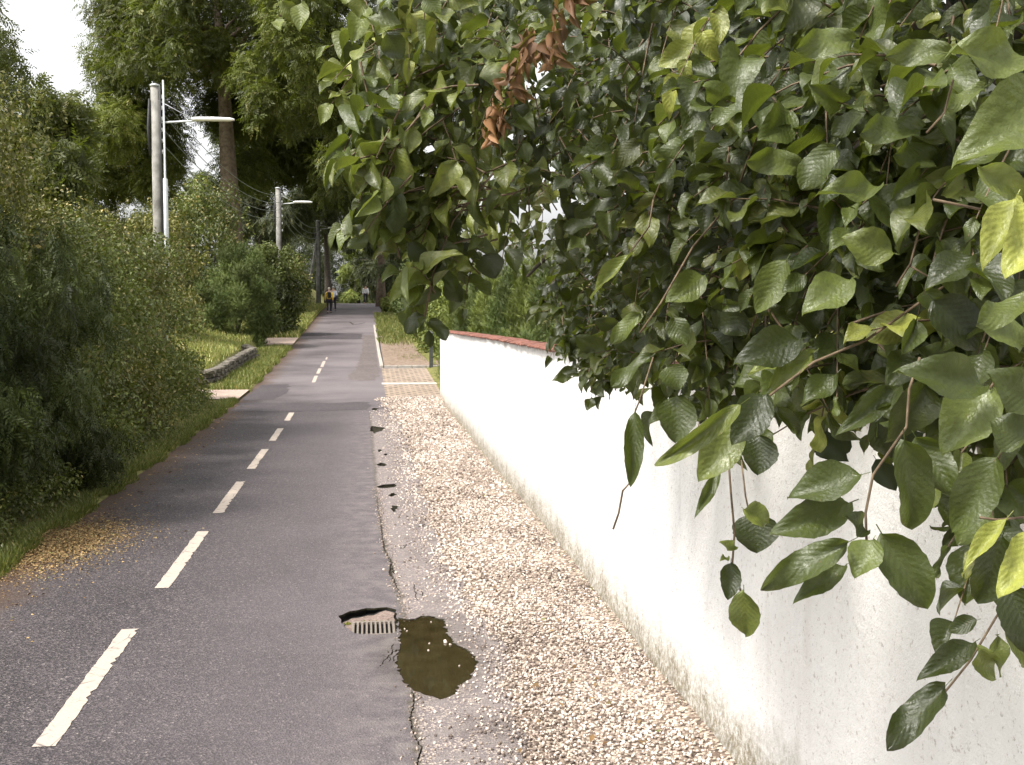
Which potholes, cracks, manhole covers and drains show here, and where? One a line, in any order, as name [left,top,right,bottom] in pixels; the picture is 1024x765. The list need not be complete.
crack [409,692,429,765]
drain grate [344,620,396,634]
pothole [395,616,479,696]
